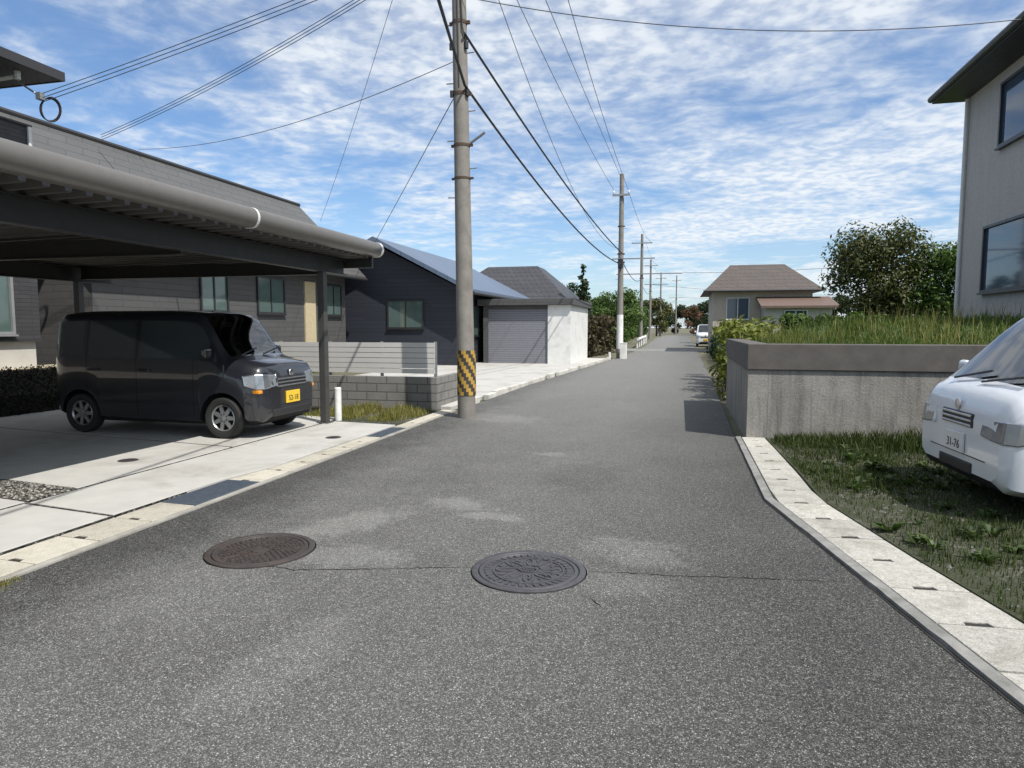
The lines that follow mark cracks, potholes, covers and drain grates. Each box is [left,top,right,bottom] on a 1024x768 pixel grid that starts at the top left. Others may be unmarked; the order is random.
manhole cover [204,533,315,569]
manhole cover [472,551,586,594]
